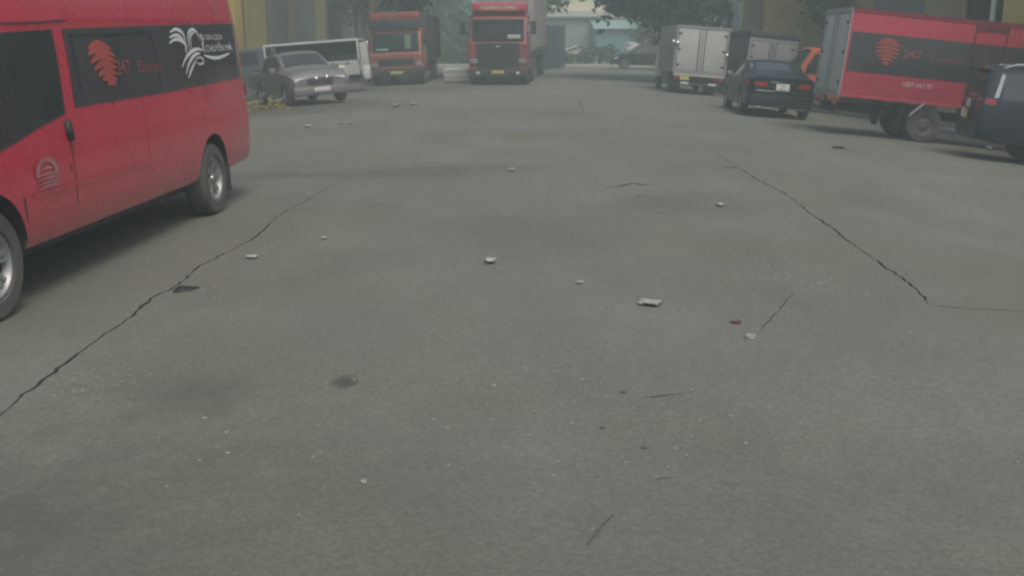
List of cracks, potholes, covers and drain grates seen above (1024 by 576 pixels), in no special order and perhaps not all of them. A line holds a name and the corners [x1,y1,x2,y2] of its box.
crack [702,143,1018,311]
crack [0,179,343,416]
pothole [171,285,200,293]
